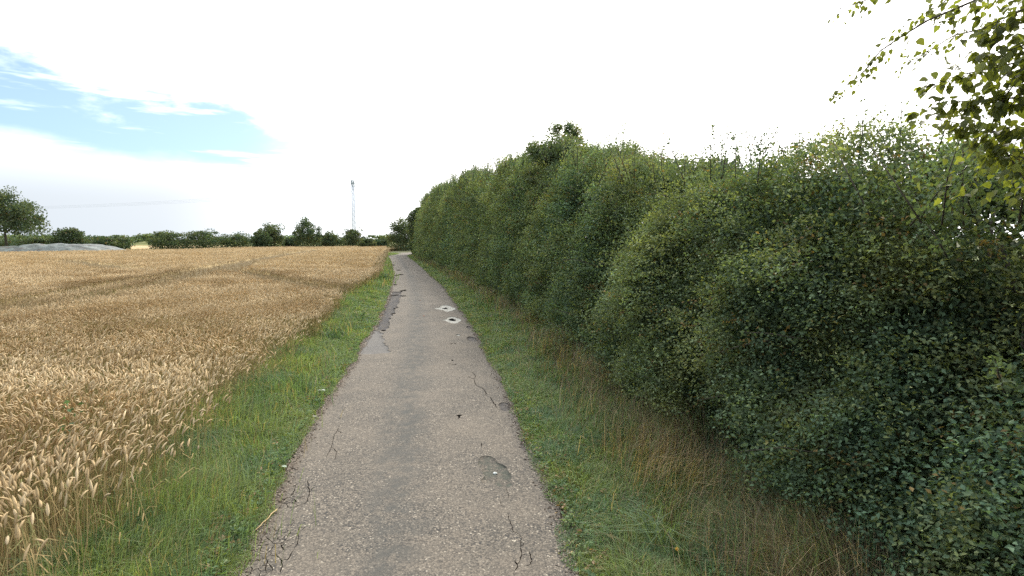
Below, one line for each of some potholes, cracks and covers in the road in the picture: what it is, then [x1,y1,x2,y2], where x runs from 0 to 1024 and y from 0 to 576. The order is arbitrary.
crack [243,480,314,576]
pothole [478,456,513,487]
crack [500,488,532,574]
